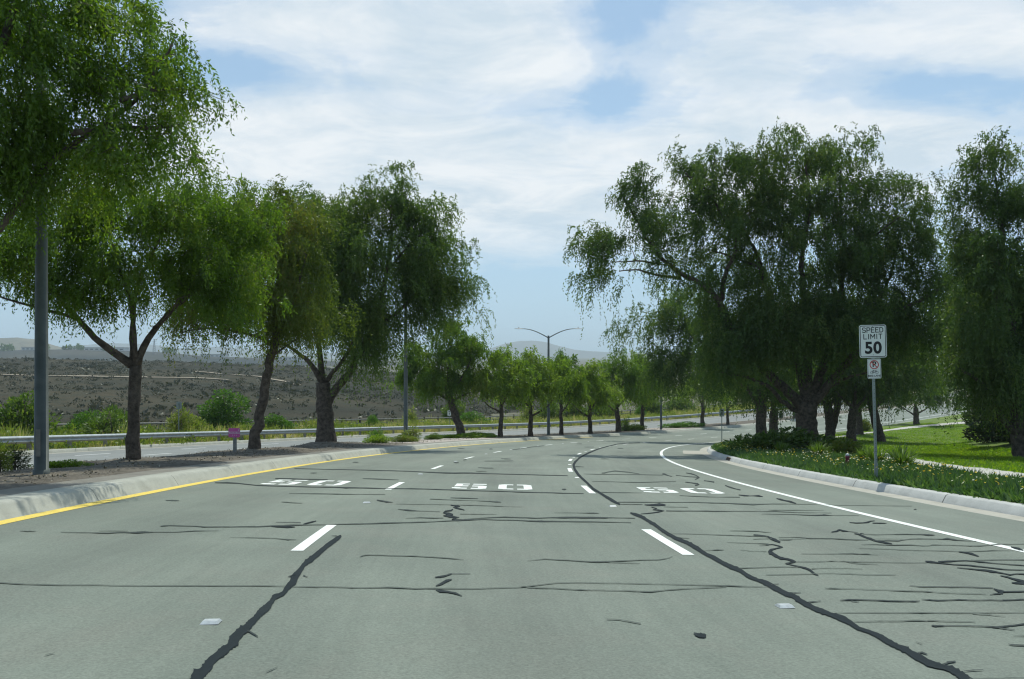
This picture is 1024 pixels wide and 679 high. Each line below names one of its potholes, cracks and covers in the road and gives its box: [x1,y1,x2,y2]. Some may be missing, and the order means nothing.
crack [844,612,1024,646]
crack [0,448,1024,595]
